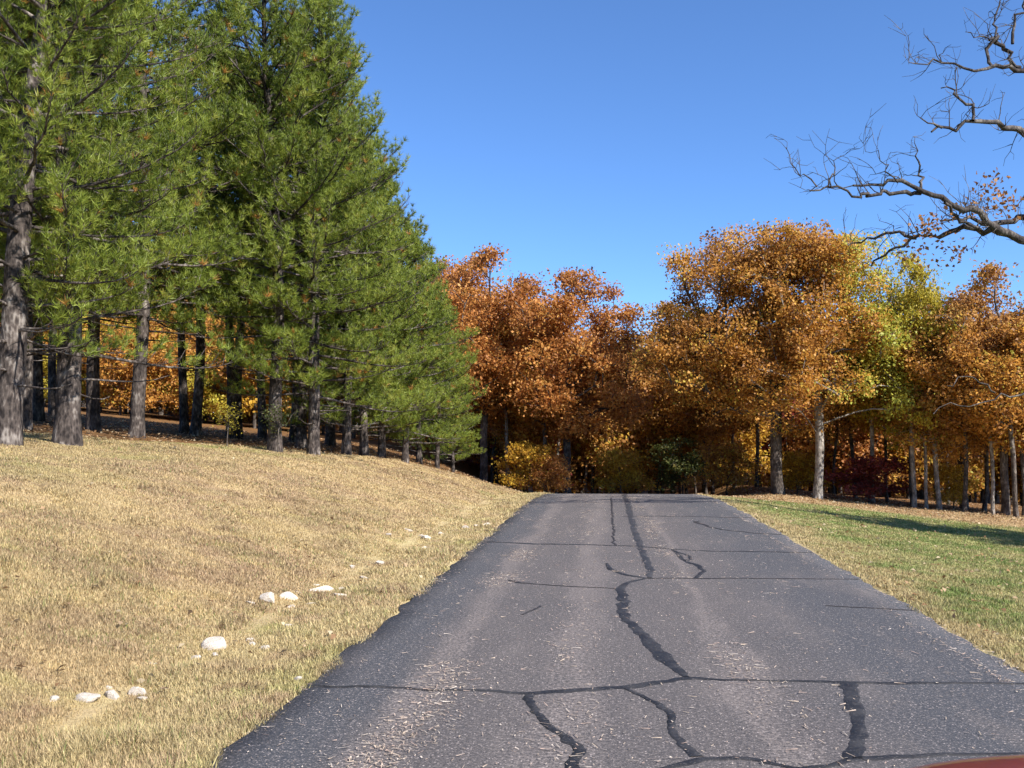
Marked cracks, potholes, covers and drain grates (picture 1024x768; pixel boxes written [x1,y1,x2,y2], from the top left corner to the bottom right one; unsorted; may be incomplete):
crack [610,498,782,545]
